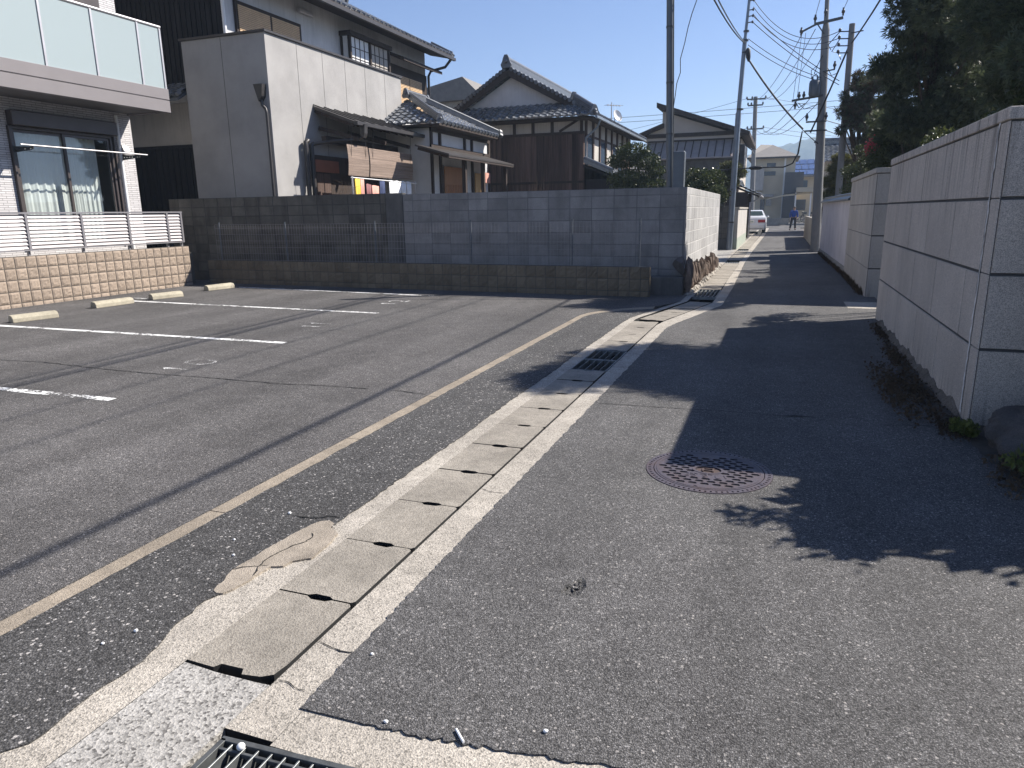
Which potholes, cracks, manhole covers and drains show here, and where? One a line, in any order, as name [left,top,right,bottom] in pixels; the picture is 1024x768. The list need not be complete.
pothole [561,578,587,597]
drain grate [190,736,356,768]
drain grate [584,350,627,361]
drain grate [692,289,721,300]
manhole cover [646,450,773,494]
crack [235,515,339,575]
drain grate [570,359,617,374]
